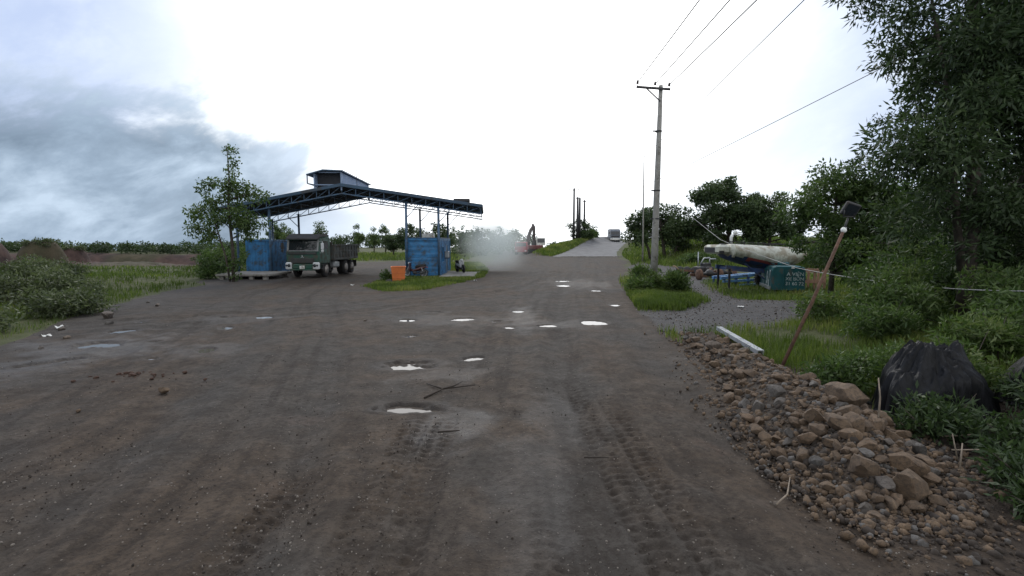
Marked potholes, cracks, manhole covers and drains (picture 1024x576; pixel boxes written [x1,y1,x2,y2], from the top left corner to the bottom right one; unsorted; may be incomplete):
pothole [370,401,451,413]
pothole [374,359,445,371]
pothole [62,340,129,348]
